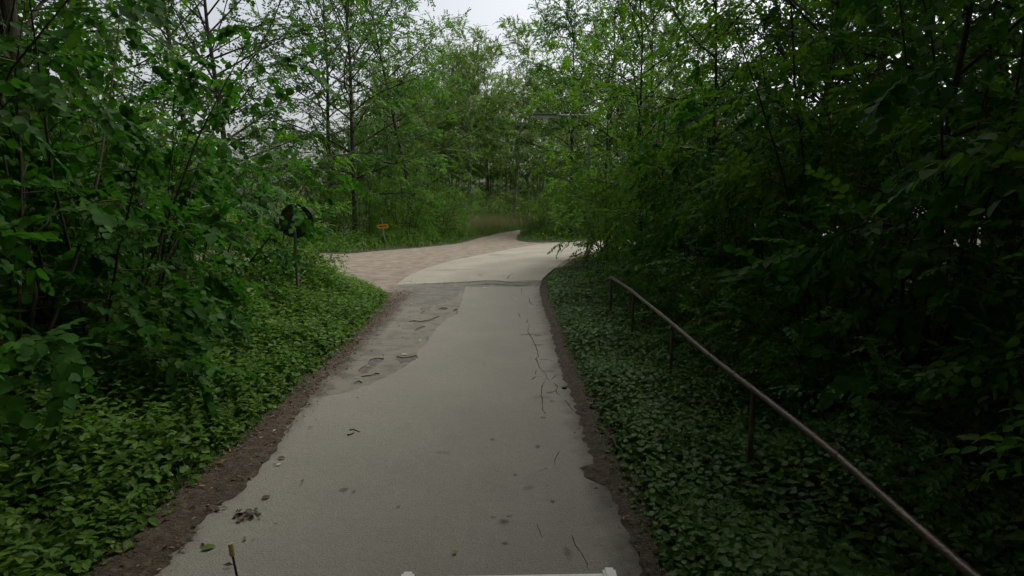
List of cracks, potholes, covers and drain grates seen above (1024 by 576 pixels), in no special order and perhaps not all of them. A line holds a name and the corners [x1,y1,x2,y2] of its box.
crack [427,275,573,412]
